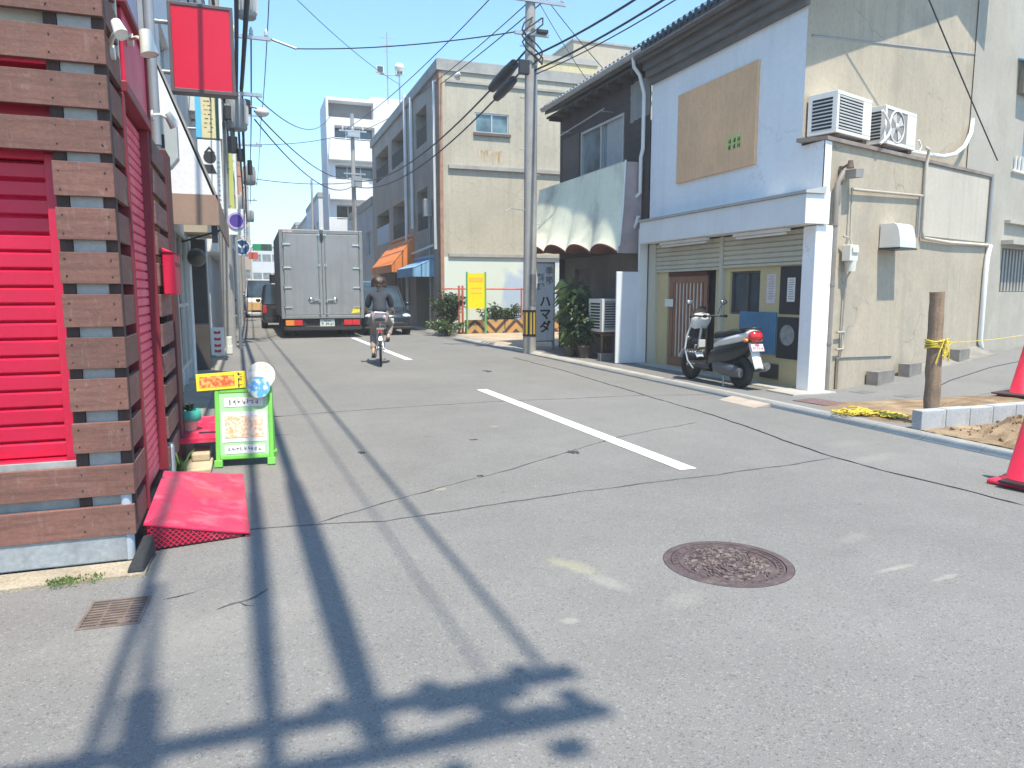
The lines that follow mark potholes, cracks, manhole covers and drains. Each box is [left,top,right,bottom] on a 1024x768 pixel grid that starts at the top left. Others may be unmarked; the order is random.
drain grate [74,595,152,631]
manhole cover [663,541,795,588]
crack [250,422,830,530]
crack [163,585,268,609]
